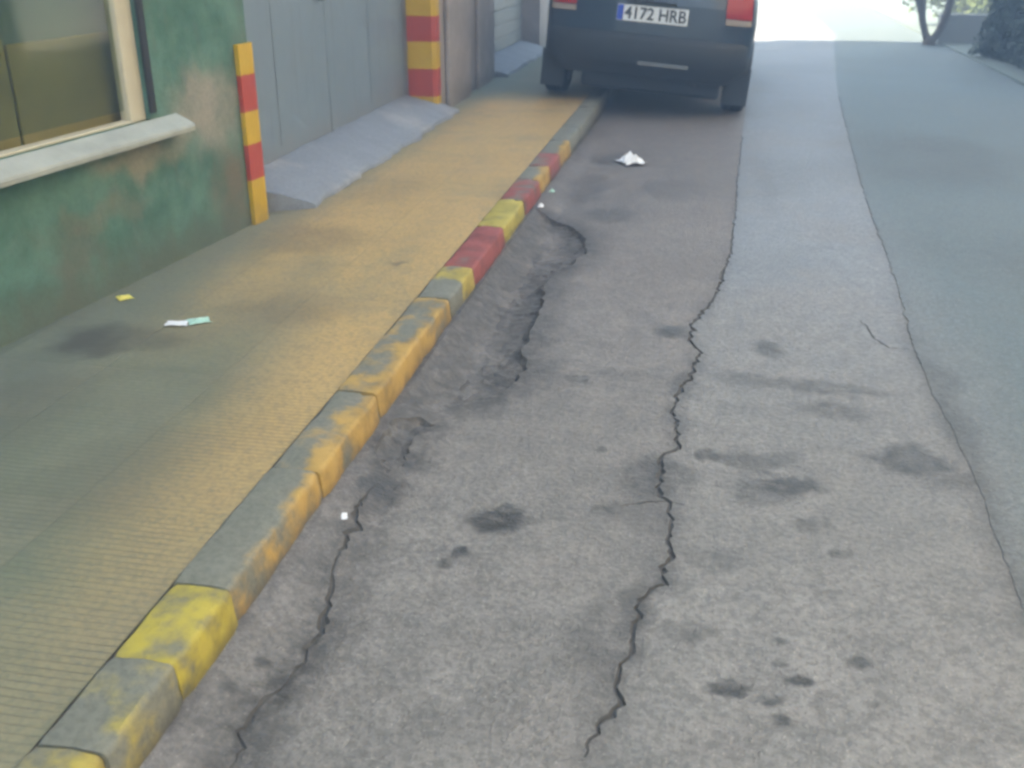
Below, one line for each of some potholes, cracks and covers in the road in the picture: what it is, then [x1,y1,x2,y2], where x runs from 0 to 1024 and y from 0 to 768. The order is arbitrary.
crack [839,98,1024,611]
crack [230,483,378,768]
crack [584,138,743,758]
